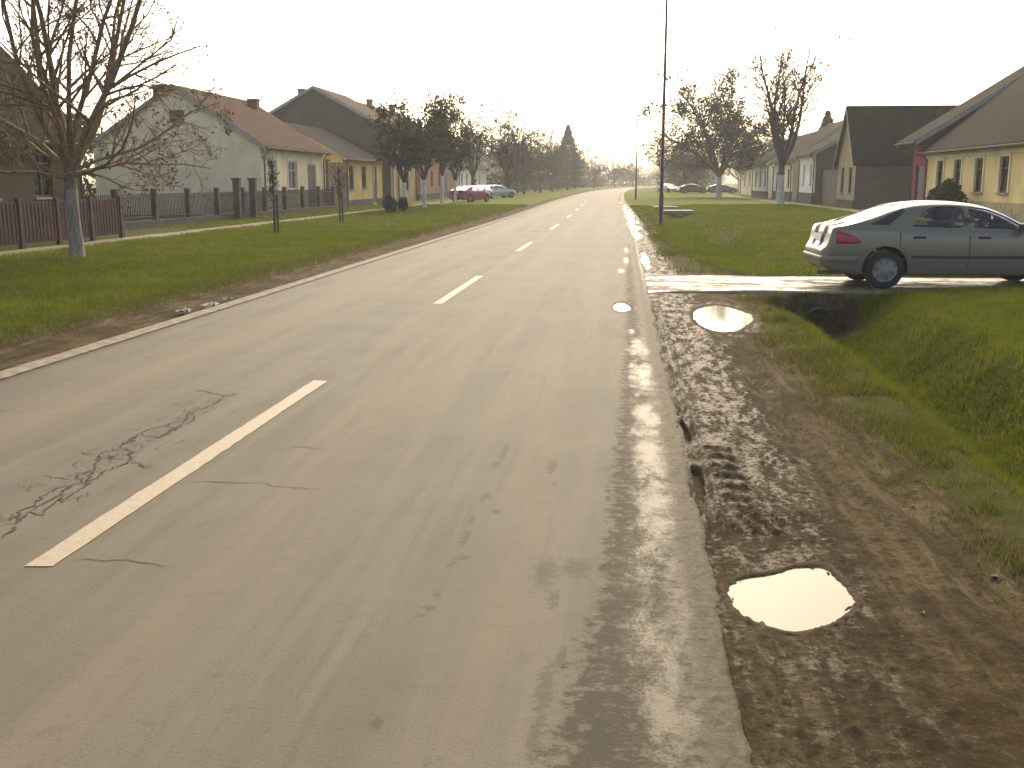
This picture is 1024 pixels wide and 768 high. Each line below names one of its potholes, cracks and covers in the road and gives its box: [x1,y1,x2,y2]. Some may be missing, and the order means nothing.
pothole [718,559,866,636]
crack [193,480,314,489]
pothole [612,301,633,312]
pothole [688,303,761,334]
crack [2,390,245,537]
